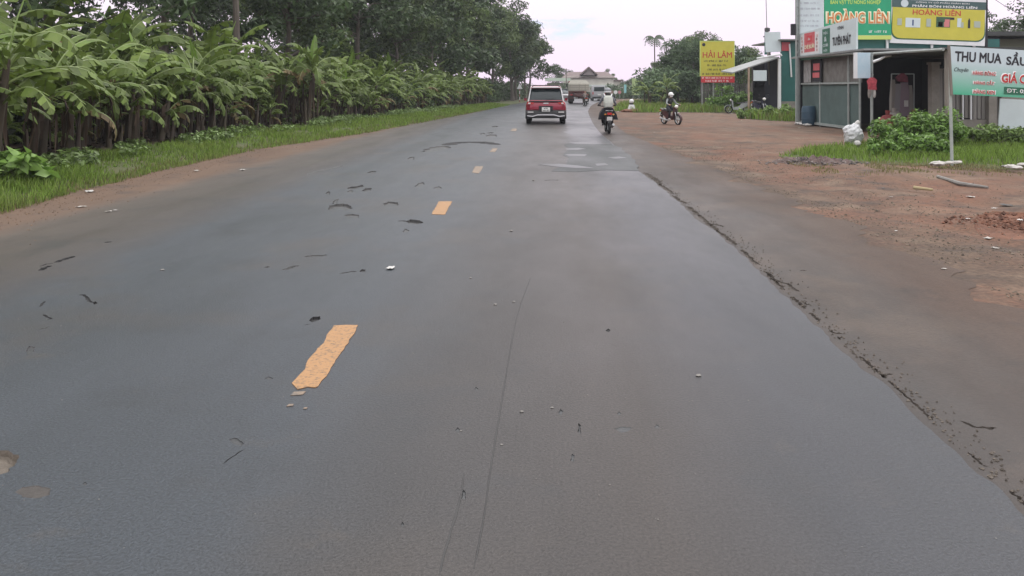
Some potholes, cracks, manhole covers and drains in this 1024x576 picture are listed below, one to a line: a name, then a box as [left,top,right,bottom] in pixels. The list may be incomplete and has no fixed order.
crack [961,421,995,430]
crack [859,356,933,420]
pothole [0,450,19,474]
